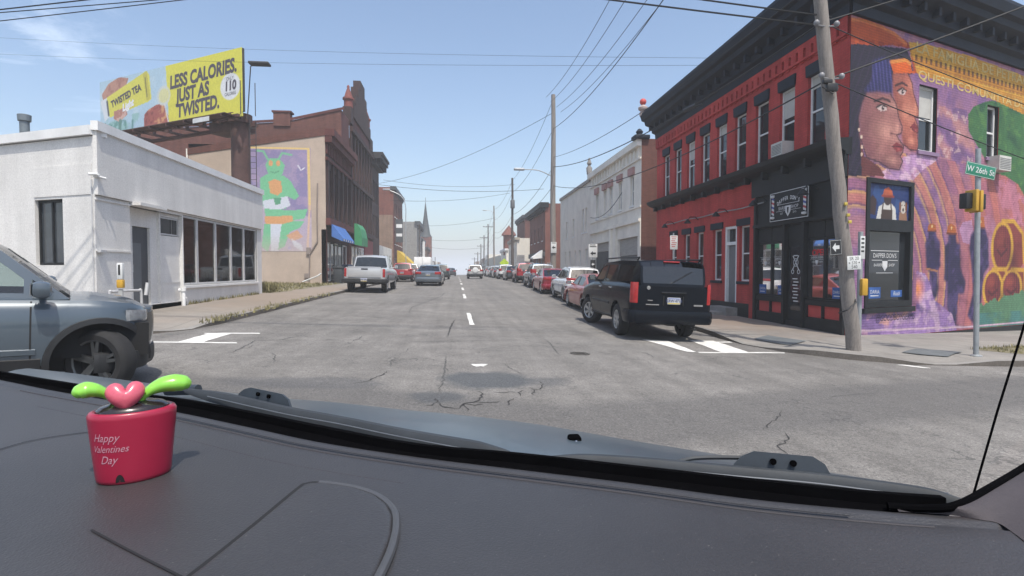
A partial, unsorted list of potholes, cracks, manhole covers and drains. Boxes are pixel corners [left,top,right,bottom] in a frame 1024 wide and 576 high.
crack [432,320,544,410]
crack [766,393,875,454]
